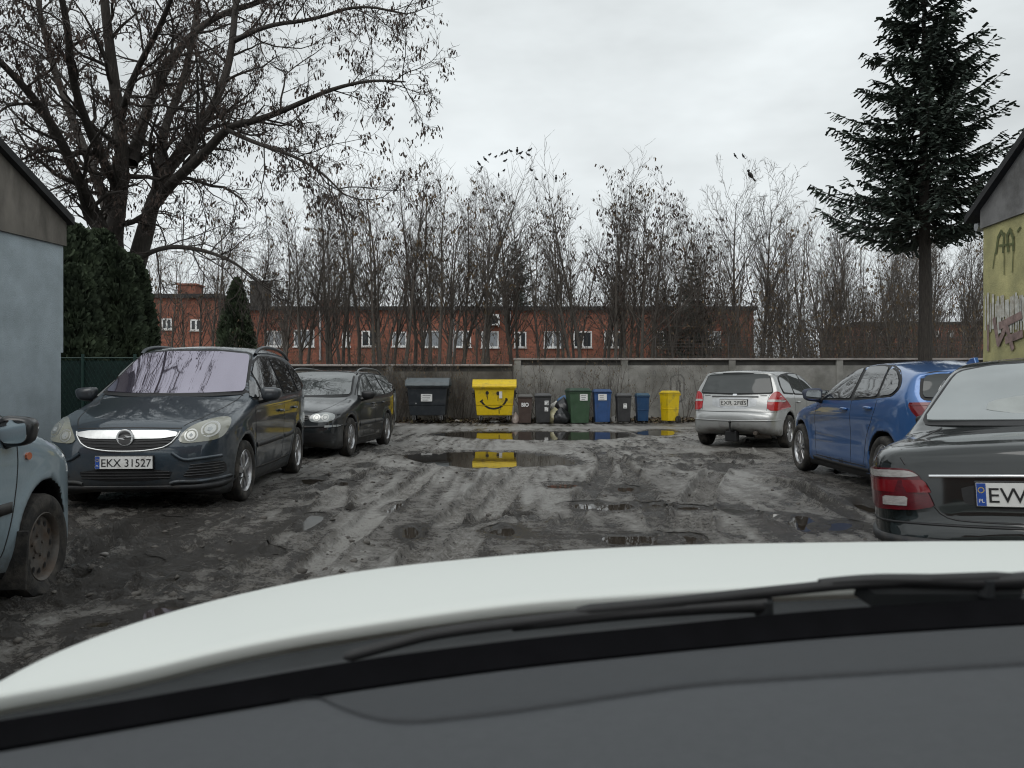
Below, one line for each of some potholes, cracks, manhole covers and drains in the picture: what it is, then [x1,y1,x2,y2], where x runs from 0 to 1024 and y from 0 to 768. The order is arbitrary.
pothole [776,513,831,533]
pothole [814,520,864,532]
pothole [560,499,647,512]
pothole [765,511,793,522]
pothole [482,523,522,537]
pothole [587,531,686,547]
pothole [293,513,329,531]
pothole [399,449,581,468]
pothole [398,525,426,539]
